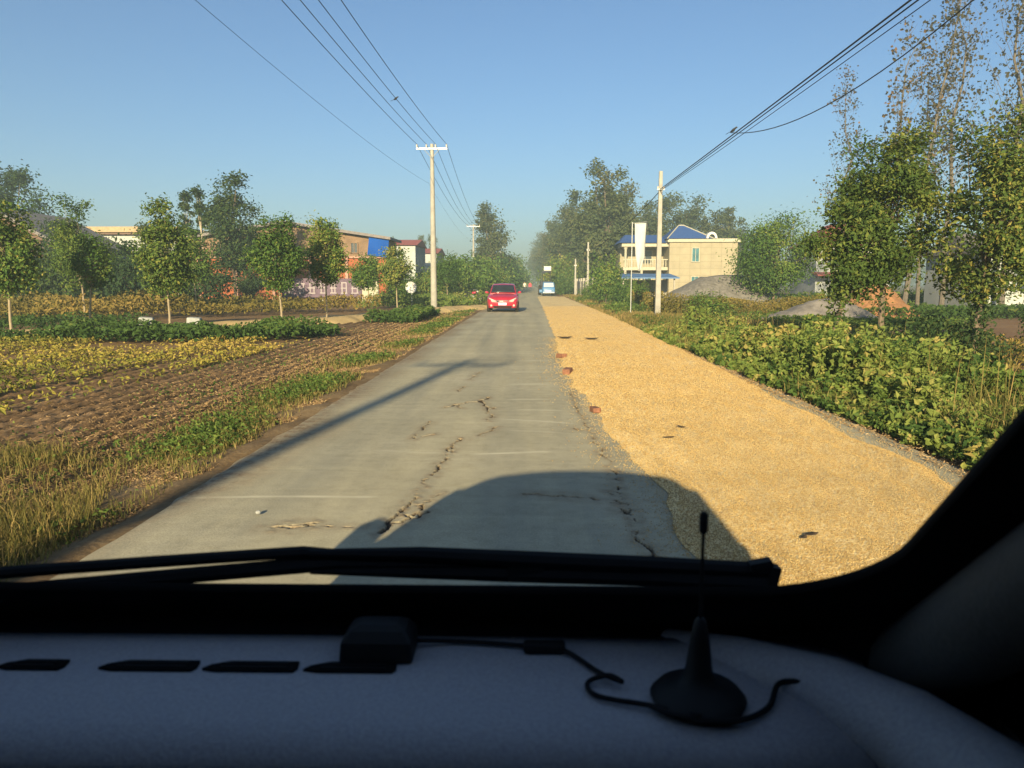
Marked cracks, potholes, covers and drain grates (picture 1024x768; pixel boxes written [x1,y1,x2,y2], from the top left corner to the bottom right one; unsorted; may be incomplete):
crack [381,440,462,534]
